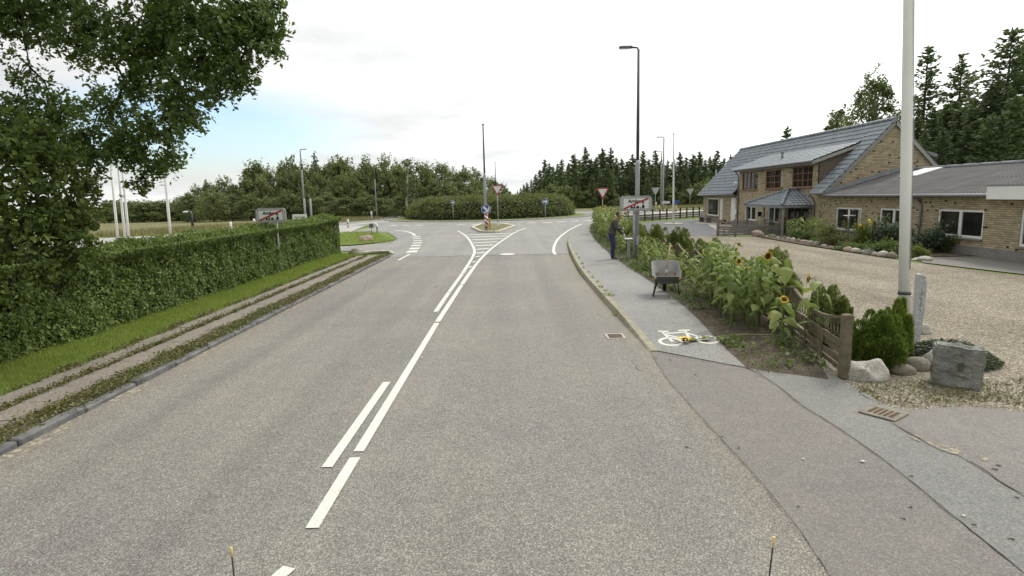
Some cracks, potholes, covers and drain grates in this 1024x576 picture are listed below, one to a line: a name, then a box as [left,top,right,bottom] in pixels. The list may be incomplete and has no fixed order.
drain grate [858,404,909,422]
